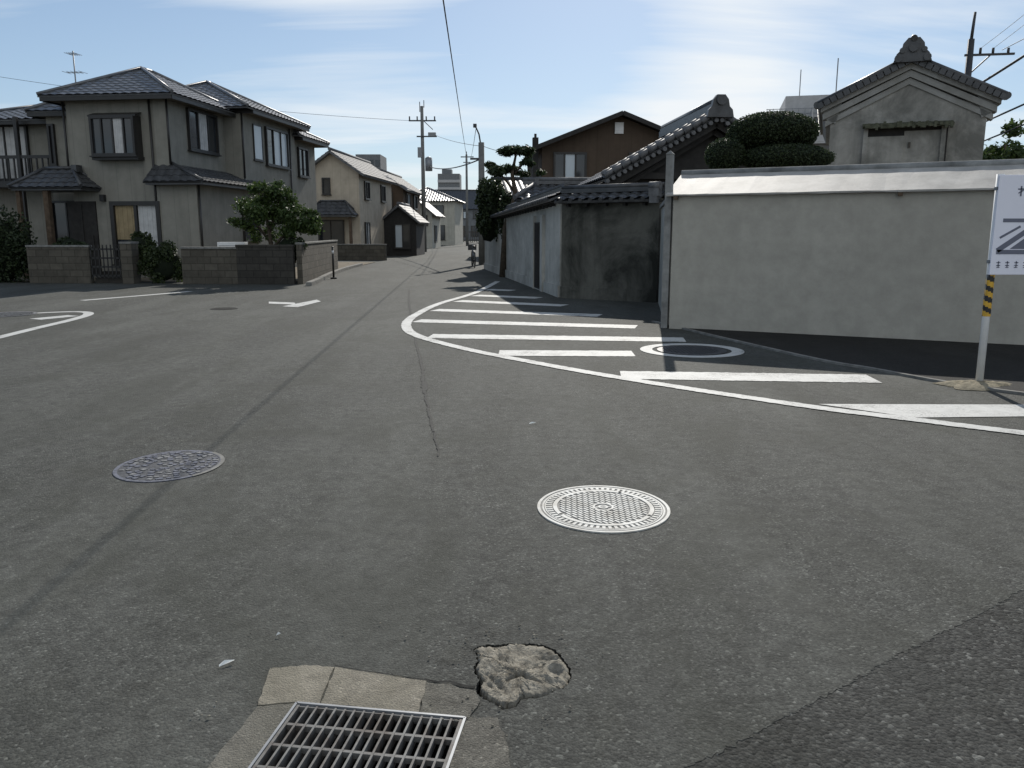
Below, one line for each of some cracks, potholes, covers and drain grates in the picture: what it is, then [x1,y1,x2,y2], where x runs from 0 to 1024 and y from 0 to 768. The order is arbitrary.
manhole cover [113,450,225,483]
crack [408,290,440,456]
manhole cover [537,485,670,534]
drain grate [208,665,511,768]
pothole [473,643,572,710]
